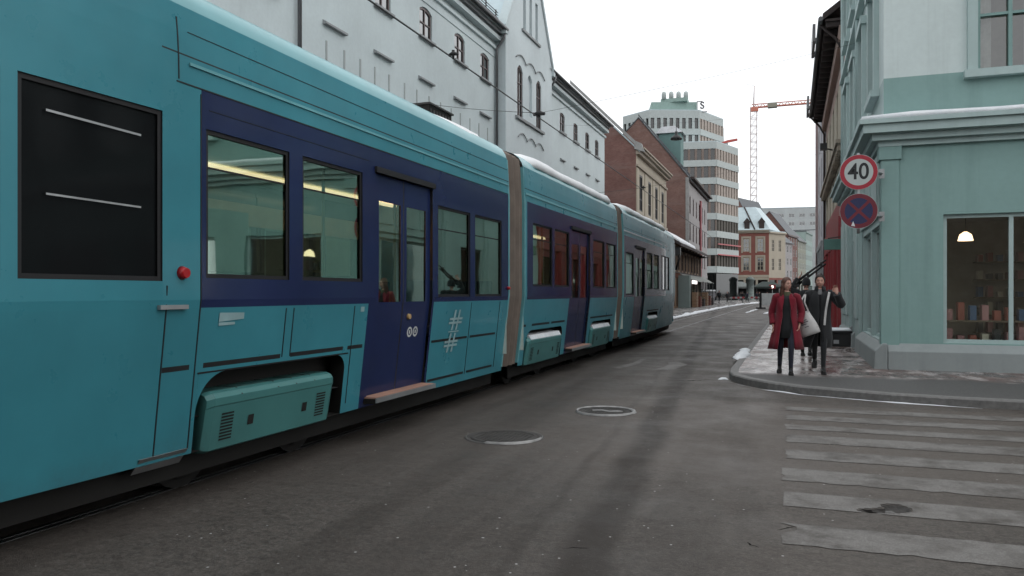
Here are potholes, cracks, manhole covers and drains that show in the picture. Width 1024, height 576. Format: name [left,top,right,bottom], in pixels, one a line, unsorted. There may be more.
manhole cover [575,406,636,417]
manhole cover [464,429,544,445]
pothole [859,505,912,514]
